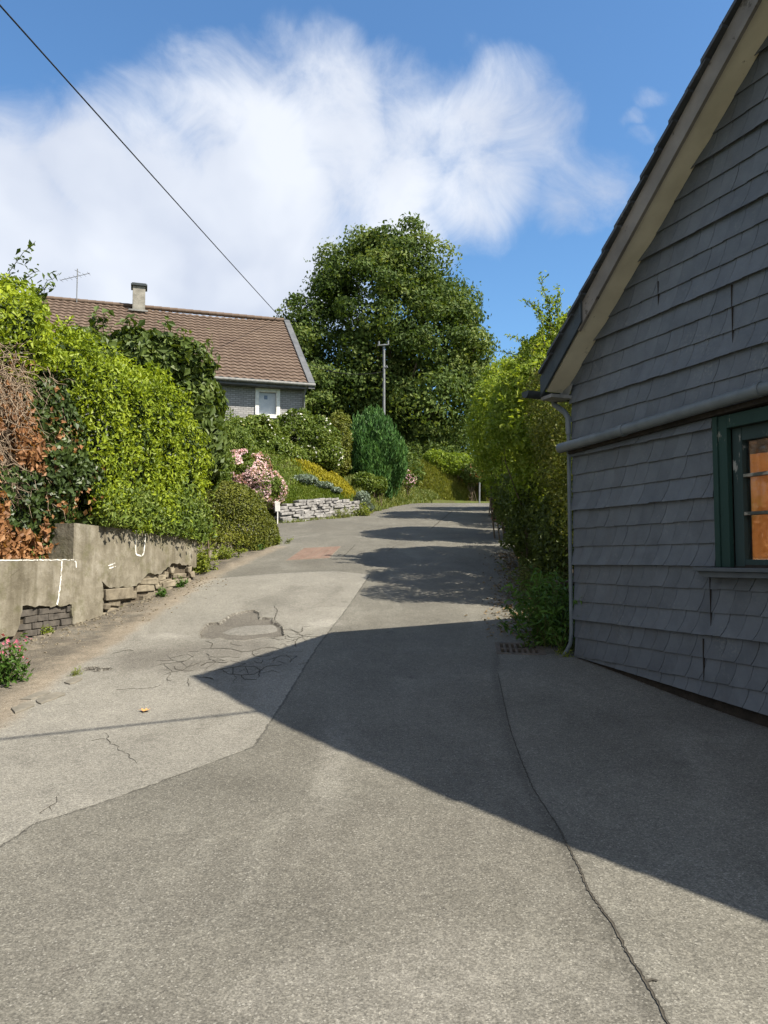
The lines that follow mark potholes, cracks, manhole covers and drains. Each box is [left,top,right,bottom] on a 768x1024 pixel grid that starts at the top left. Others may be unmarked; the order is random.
pothole [198,609,286,641]
crack [116,606,318,690]
drain grate [495,642,547,655]
